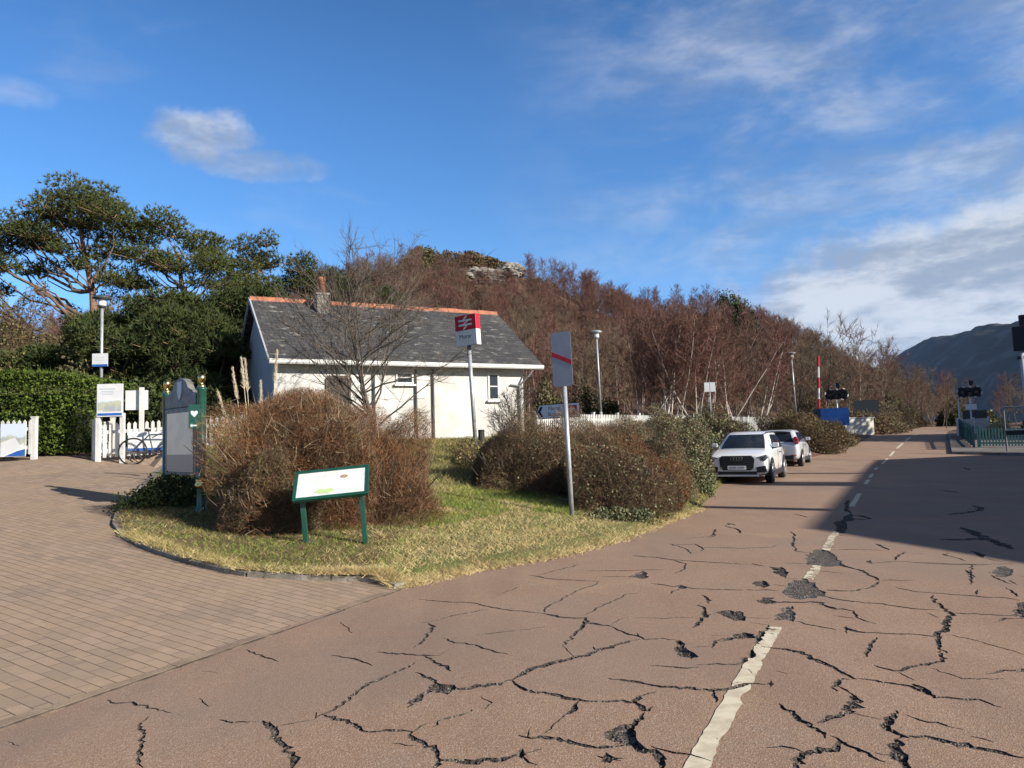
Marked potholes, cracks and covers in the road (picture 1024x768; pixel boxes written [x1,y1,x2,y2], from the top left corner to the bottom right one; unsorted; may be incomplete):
pothole [428,683,457,695]
crack [199,490,1024,768]
pothole [770,567,789,578]
pothole [774,606,796,621]
pothole [604,724,638,750]
pothole [804,550,842,567]
pothole [782,578,826,600]
pothole [674,641,698,660]
pothole [987,566,1013,577]
crack [108,700,171,768]
pothole [714,610,746,621]
